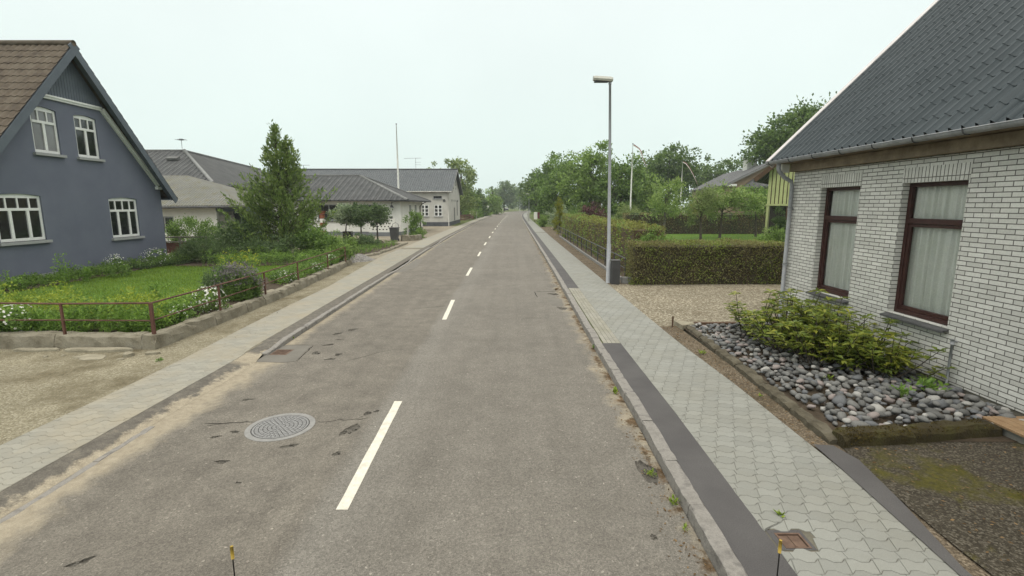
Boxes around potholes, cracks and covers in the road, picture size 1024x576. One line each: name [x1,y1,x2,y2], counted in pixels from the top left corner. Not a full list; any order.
manhole cover [244,413,315,442]
manhole cover [766,530,817,550]
pothole [635,460,659,484]
pothole [339,423,361,436]
pothole [64,556,97,567]
